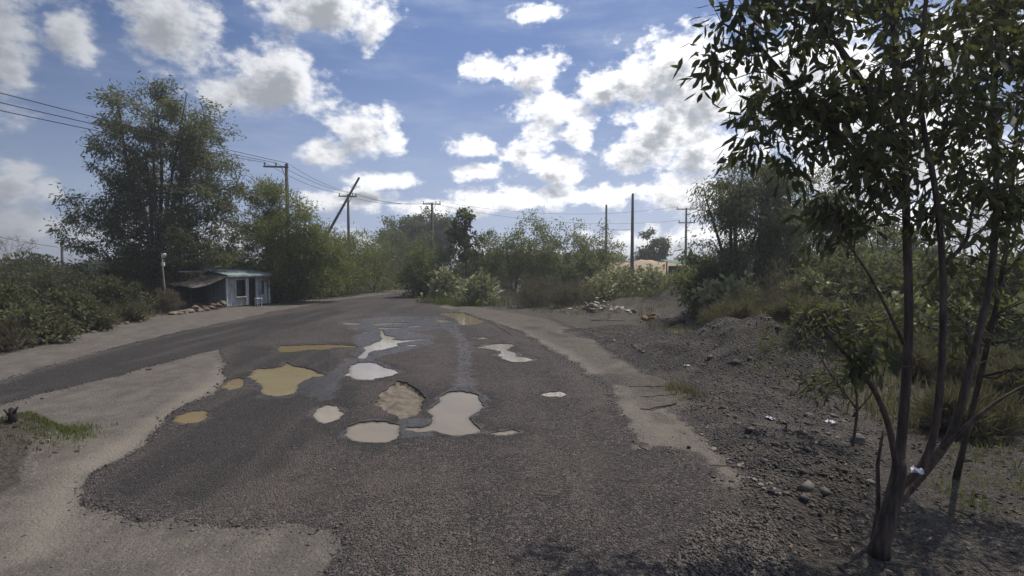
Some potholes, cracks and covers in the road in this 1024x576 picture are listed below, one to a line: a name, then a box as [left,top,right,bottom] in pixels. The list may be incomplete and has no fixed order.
pothole [276,344,358,352]
pothole [247,362,327,396]
crack [629,386,677,411]
pothole [220,377,245,390]
pothole [405,390,484,435]
pothole [356,330,432,359]
pothole [436,312,486,325]
pothole [344,420,400,443]
pothole [313,404,344,424]
pothole [474,343,533,362]
pothole [343,362,399,380]
pothole [374,381,427,419]
